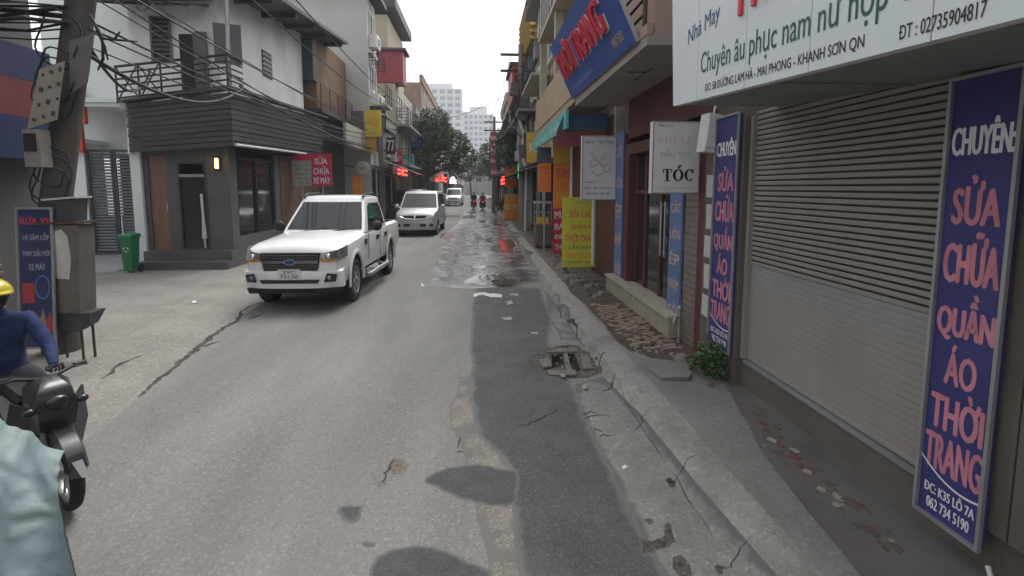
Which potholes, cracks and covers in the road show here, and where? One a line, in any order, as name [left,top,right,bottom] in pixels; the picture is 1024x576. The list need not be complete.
pothole [673,555,692,576]
pothole [641,522,676,554]
pothole [388,458,409,475]
crack [580,411,612,438]
crack [101,356,141,379]
